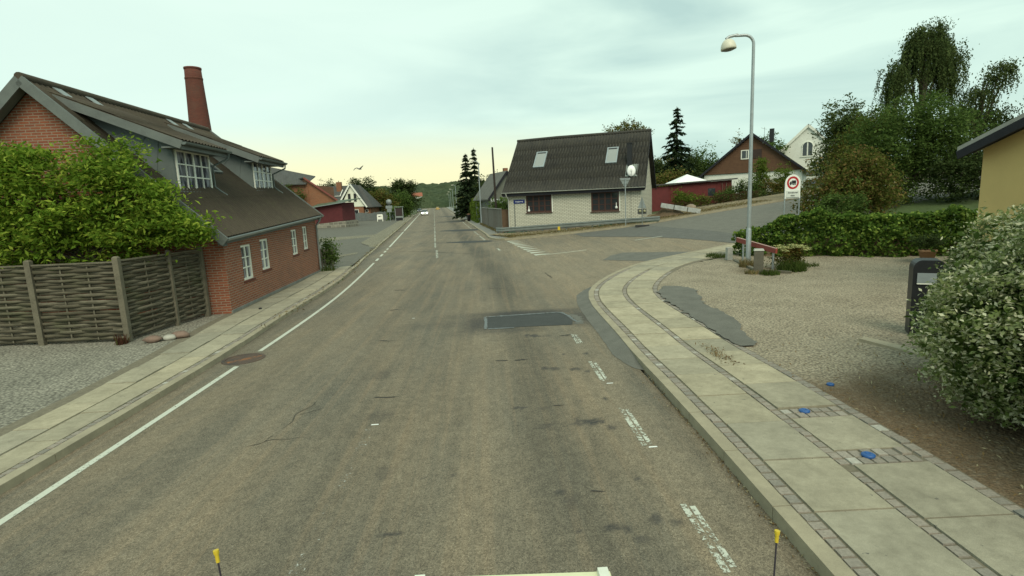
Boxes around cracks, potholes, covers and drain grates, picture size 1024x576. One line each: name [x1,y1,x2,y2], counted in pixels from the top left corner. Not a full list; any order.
manhole cover [221,353,266,365]
crack [246,401,319,447]
